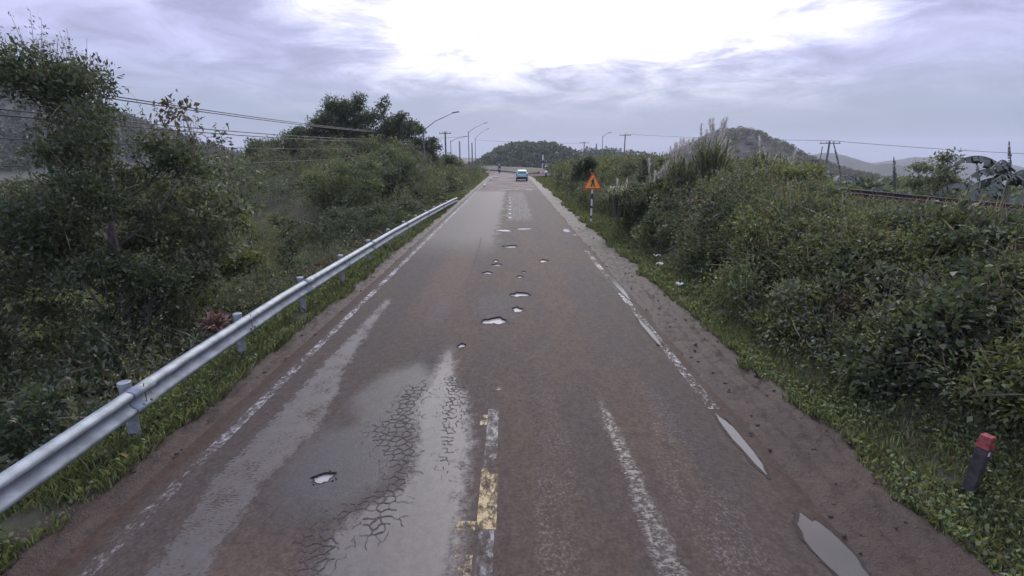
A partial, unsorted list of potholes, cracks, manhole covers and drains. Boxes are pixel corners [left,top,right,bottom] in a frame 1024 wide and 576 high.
crack [286,379,437,575]
pothole [310,470,337,485]
pothole [479,316,512,325]
crack [431,373,480,481]
